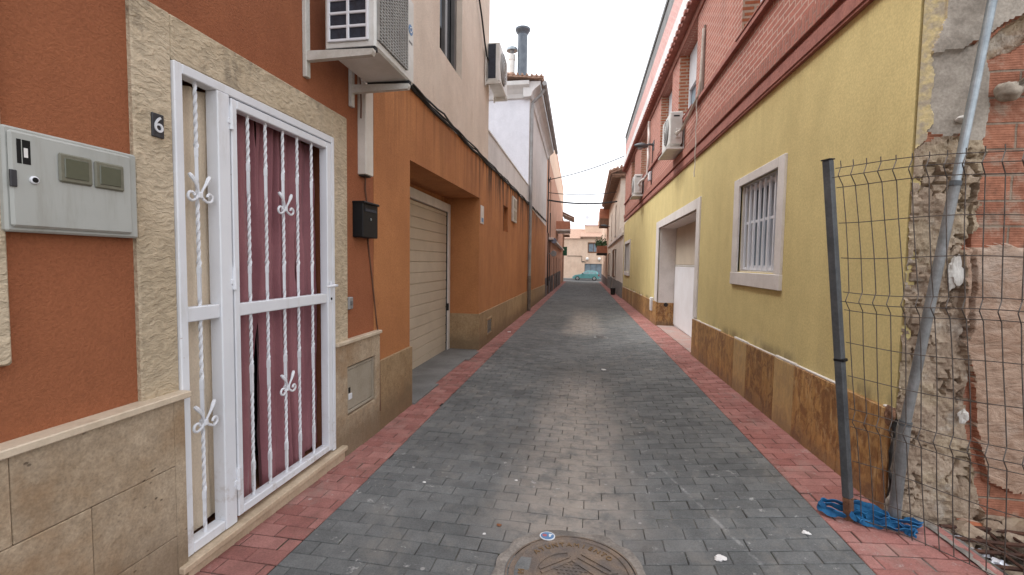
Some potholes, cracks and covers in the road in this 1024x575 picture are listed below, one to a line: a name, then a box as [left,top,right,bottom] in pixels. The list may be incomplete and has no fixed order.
manhole cover [491,530,646,575]
